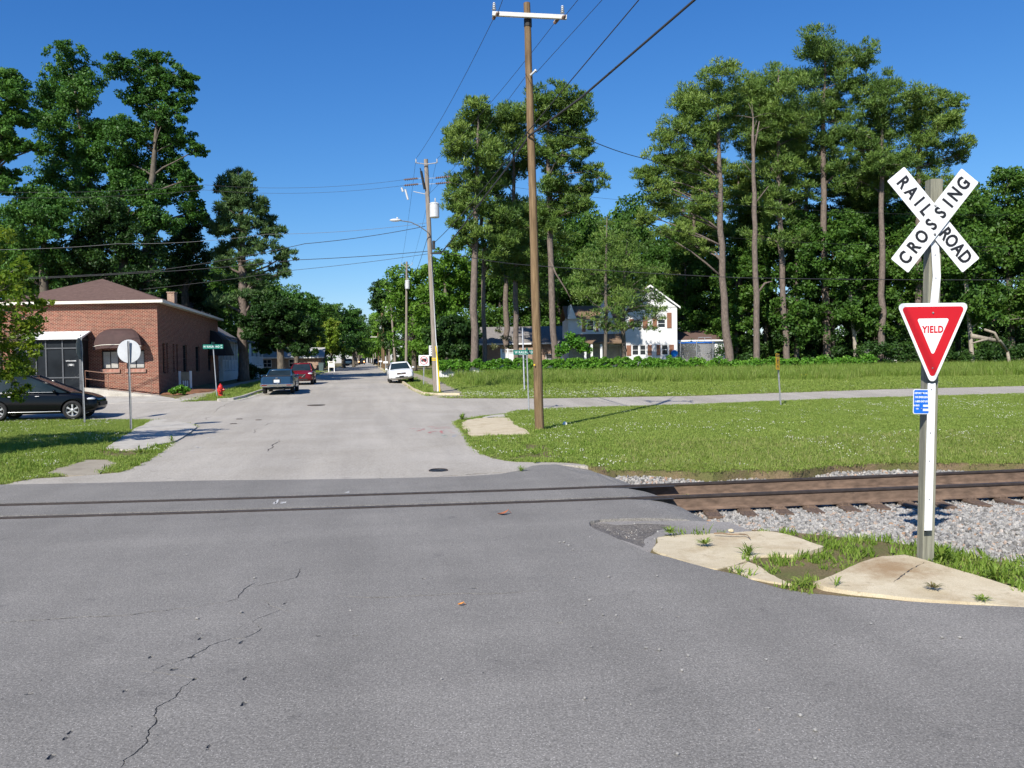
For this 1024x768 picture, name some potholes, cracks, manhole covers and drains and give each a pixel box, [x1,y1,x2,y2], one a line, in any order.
crack [123,603,276,764]
